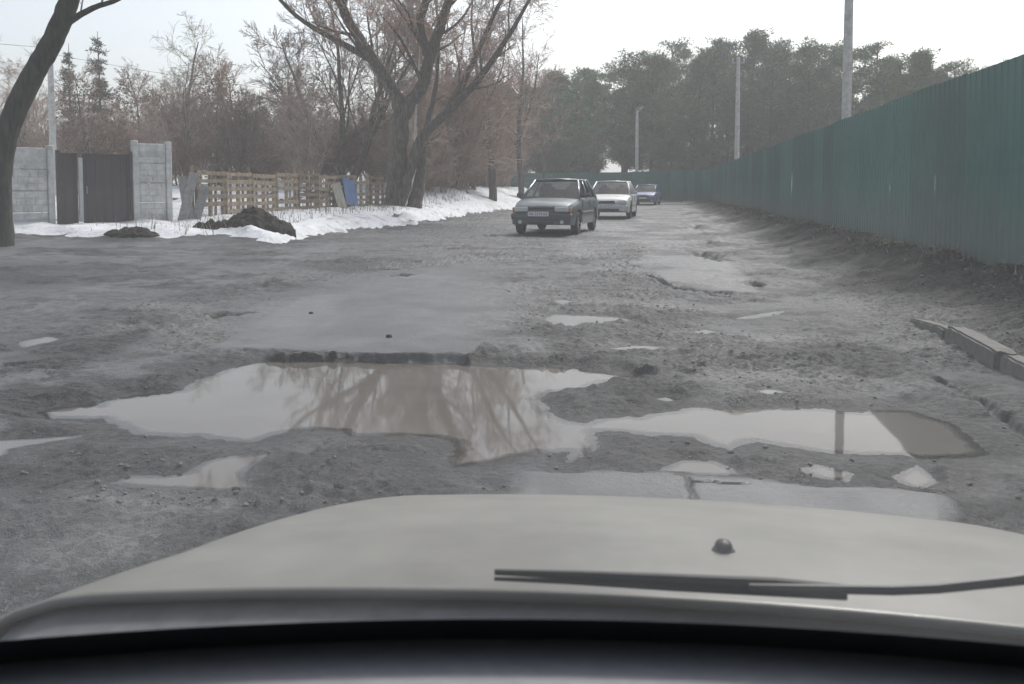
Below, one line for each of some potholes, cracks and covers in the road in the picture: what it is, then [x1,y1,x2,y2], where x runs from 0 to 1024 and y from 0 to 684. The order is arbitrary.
pothole [13,350,1011,475]
pothole [97,448,281,494]
pothole [691,250,735,262]
pothole [785,460,866,485]
pothole [539,313,635,326]
pothole [881,461,956,488]
